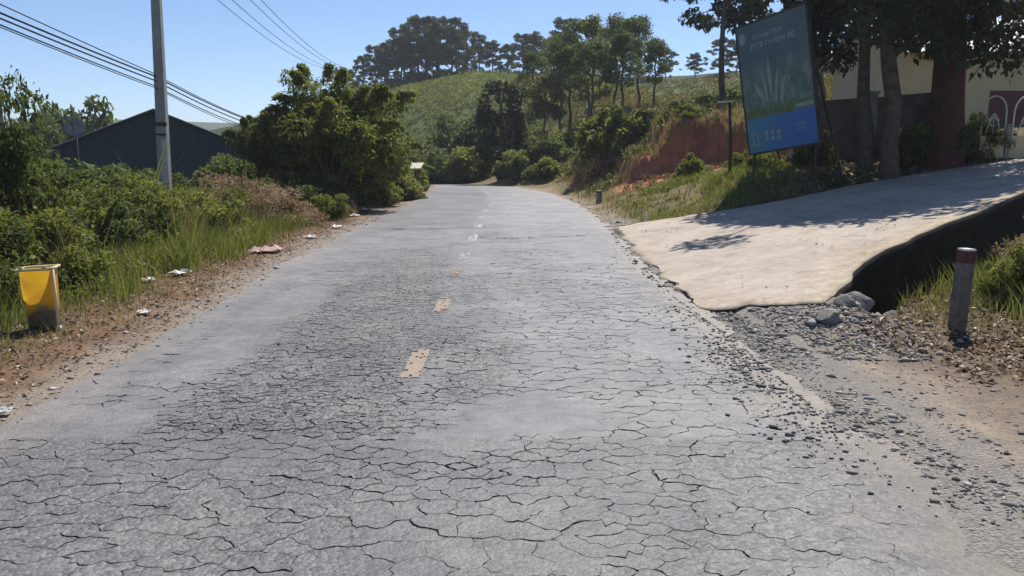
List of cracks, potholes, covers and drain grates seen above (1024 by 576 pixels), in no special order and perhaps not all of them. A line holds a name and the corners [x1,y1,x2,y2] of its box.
crack [477,233,625,280]
crack [0,254,897,576]
